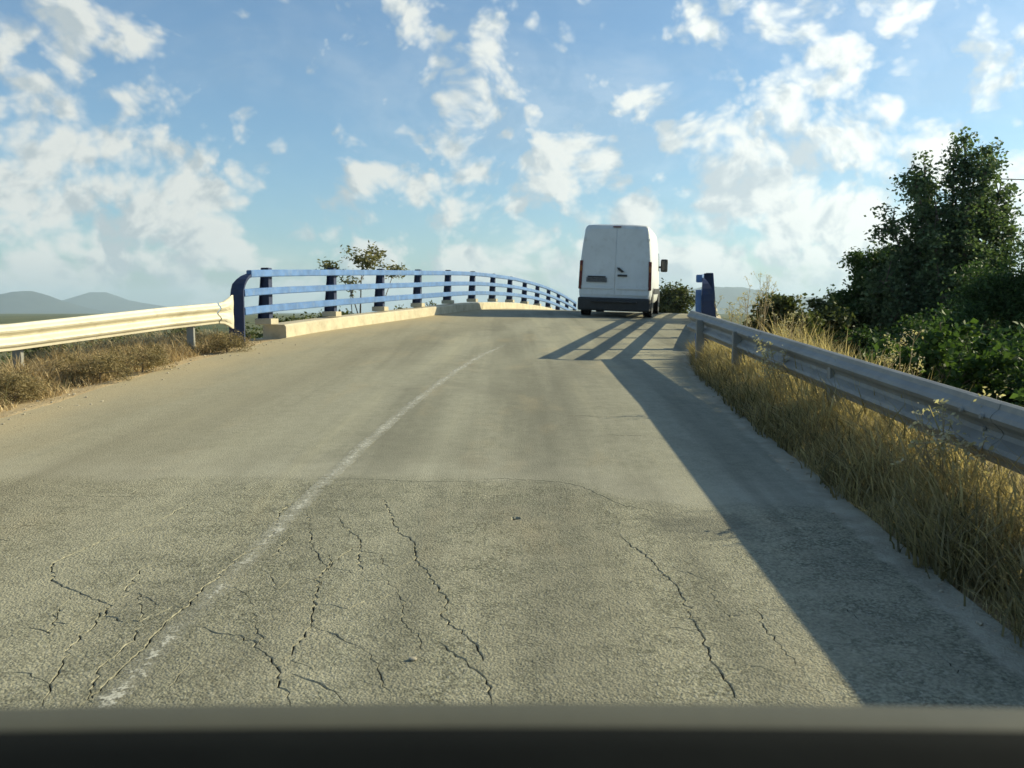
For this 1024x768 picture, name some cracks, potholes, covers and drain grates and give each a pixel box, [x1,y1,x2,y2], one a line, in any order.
crack [622,537,796,704]
crack [2,497,546,707]
